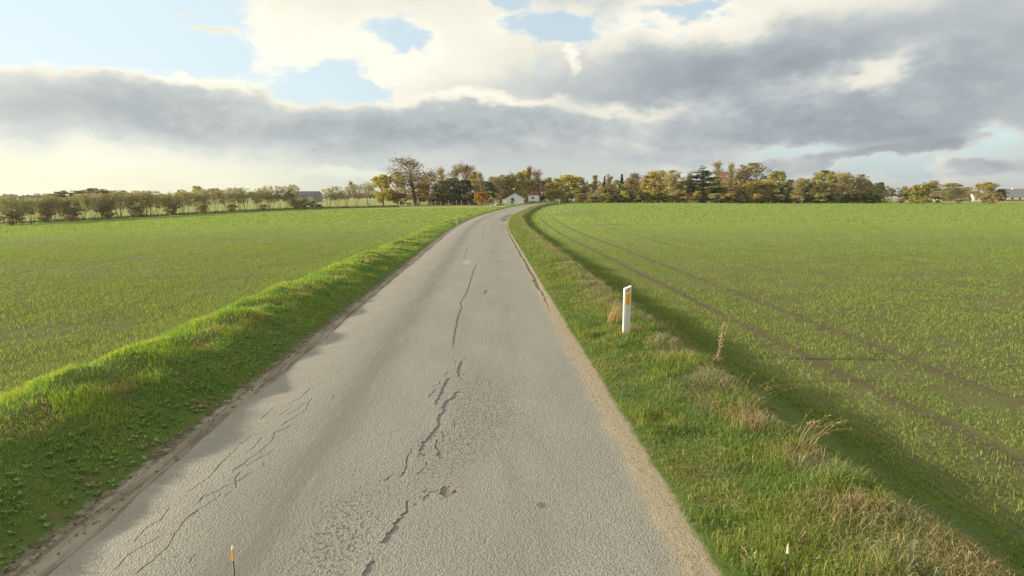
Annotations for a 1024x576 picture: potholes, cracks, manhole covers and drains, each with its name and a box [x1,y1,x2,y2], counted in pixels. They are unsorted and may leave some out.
crack [112,389,333,575]
crack [362,226,486,576]
pothole [439,485,459,498]
